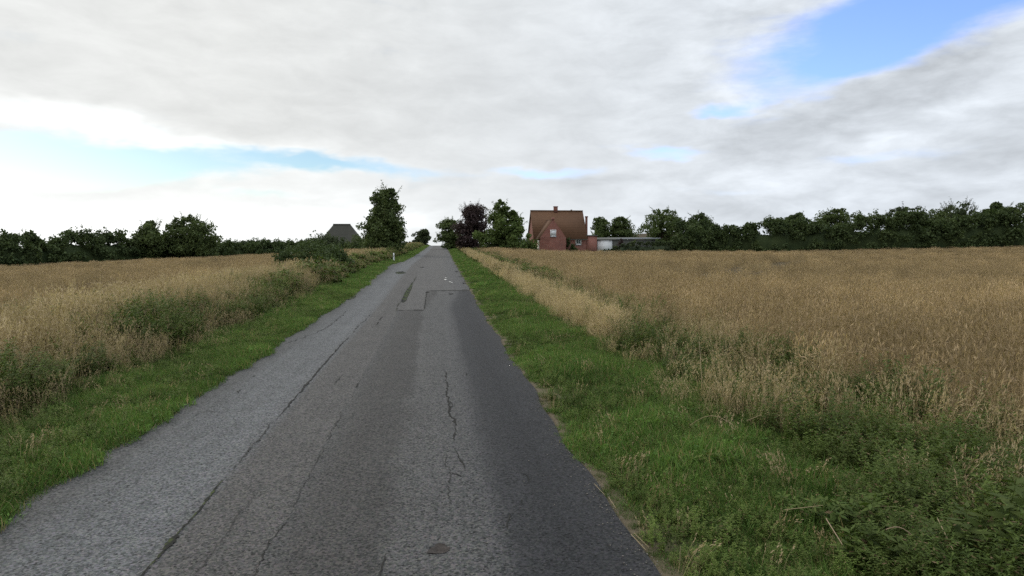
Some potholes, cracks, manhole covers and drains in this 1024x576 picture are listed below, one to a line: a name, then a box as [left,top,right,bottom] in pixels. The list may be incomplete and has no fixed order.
crack [231,311,382,472]
crack [195,491,258,574]
crack [444,370,467,505]
crack [253,521,287,576]
